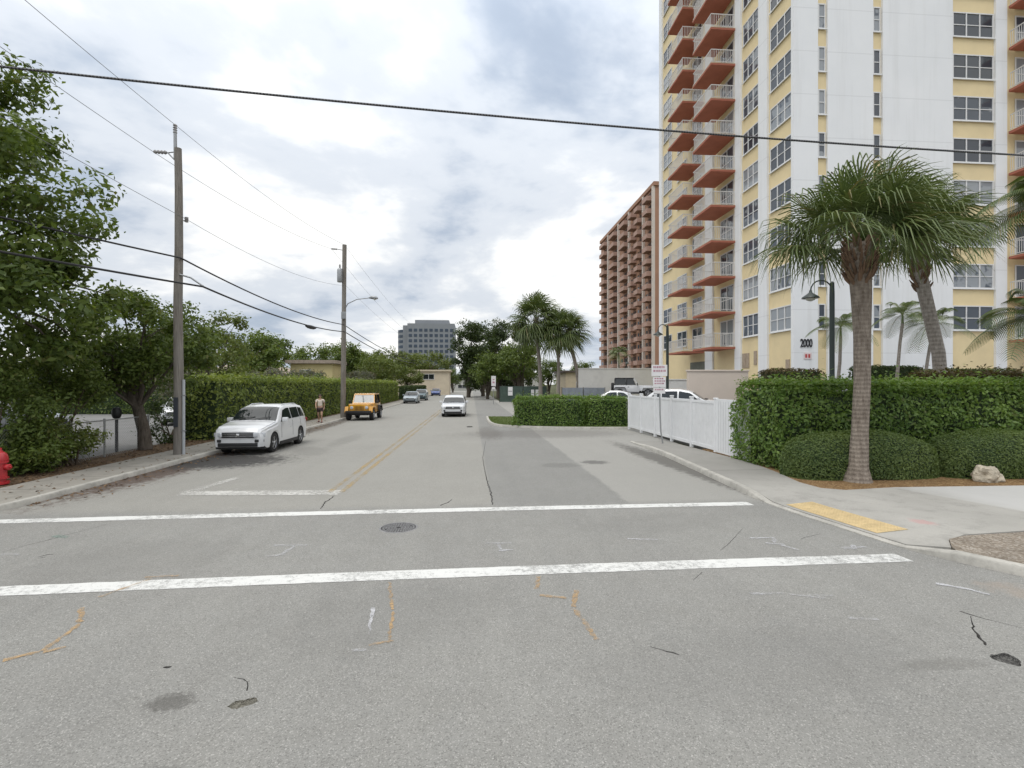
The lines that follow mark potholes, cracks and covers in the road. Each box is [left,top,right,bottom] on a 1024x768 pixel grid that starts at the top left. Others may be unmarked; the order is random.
crack [960,611,1021,645]
manhole cover [379,522,418,533]
pothole [990,653,1021,666]
crack [482,447,493,505]
pothole [227,697,258,709]
